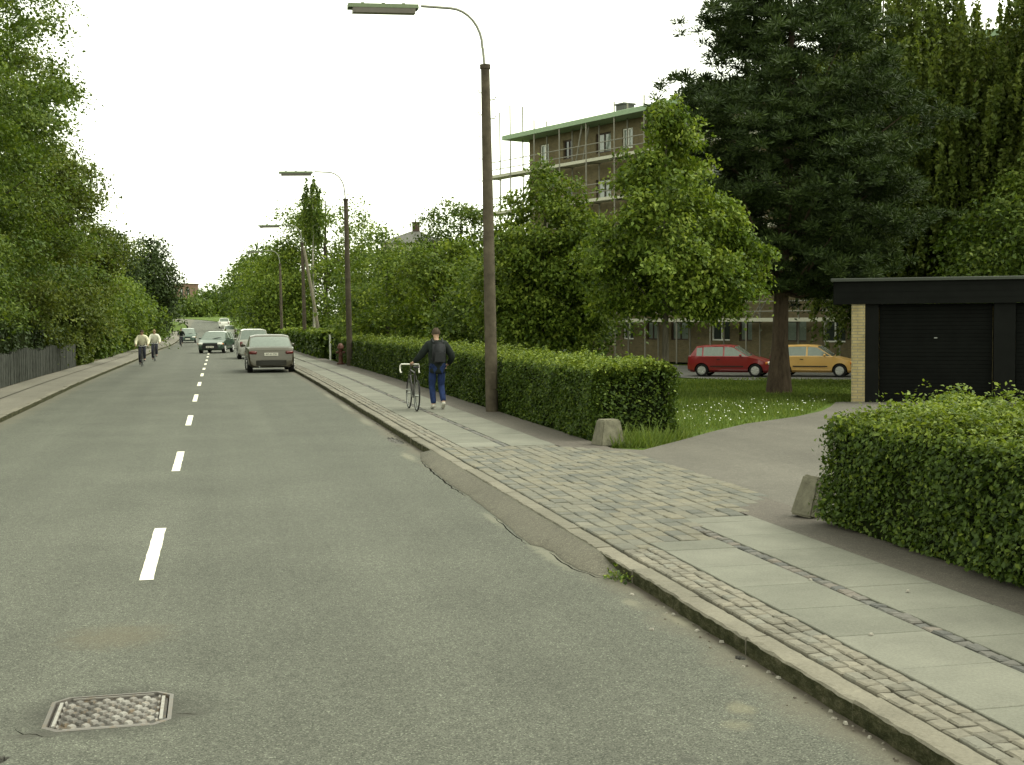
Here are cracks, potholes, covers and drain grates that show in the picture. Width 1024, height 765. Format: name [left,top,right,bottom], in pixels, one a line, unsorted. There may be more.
manhole cover [41,691,174,732]
